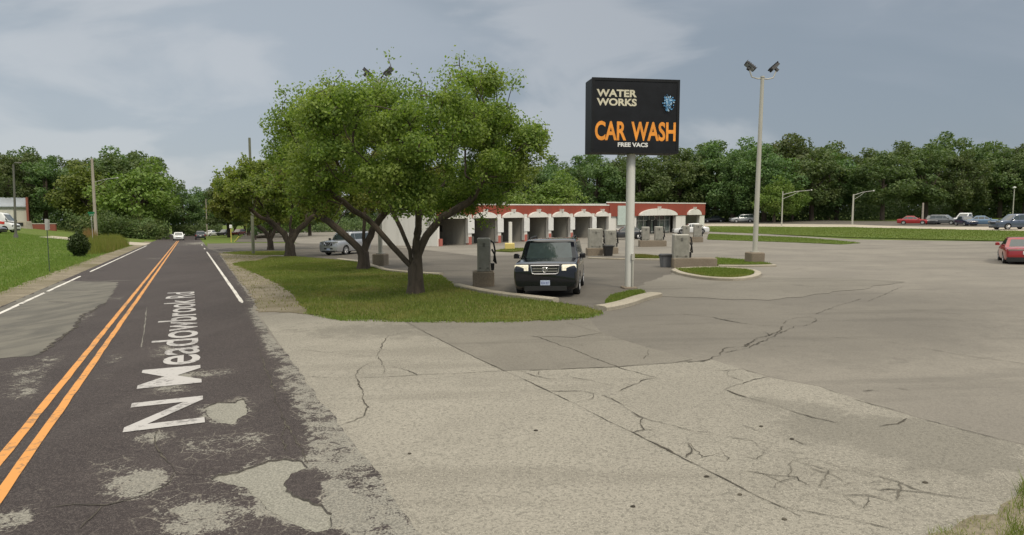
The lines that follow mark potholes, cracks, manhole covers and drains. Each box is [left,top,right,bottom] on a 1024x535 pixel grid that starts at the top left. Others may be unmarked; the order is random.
crack [528,333,985,507]
crack [51,431,213,529]
crack [311,332,416,424]
crack [694,288,898,423]
pothole [203,398,248,424]
pothole [211,458,332,533]
